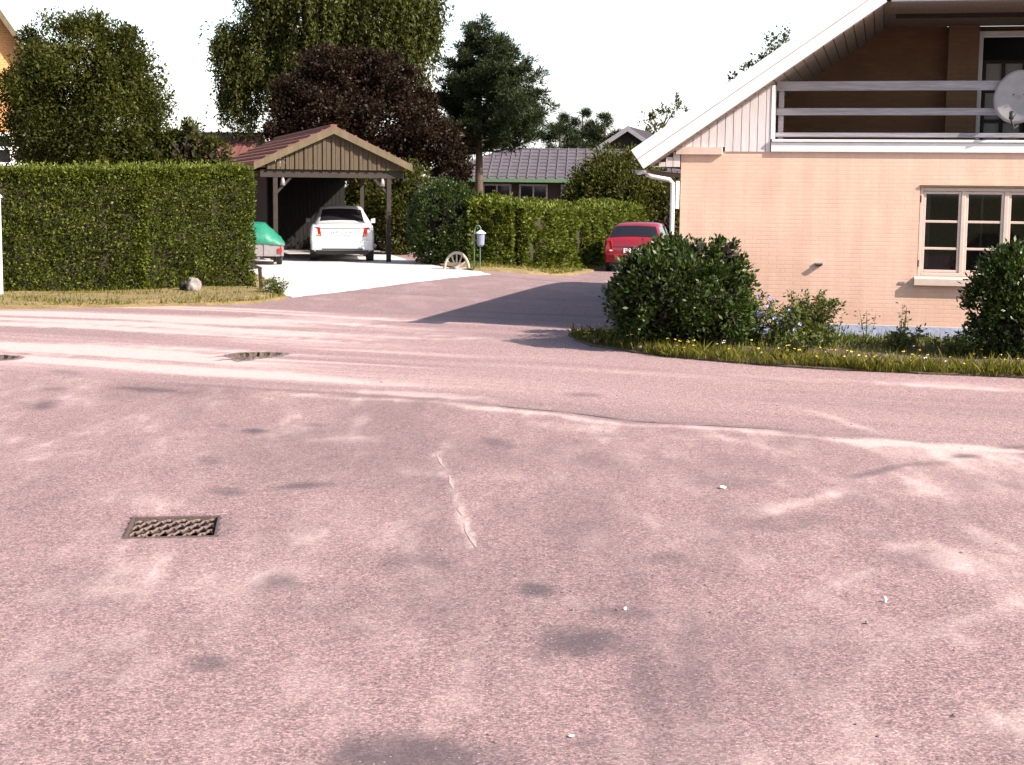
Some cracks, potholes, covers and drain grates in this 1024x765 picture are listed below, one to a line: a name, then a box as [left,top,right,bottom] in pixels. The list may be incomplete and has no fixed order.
pothole [213,352,288,362]
crack [437,452,477,548]
drain grate [122,515,221,539]
